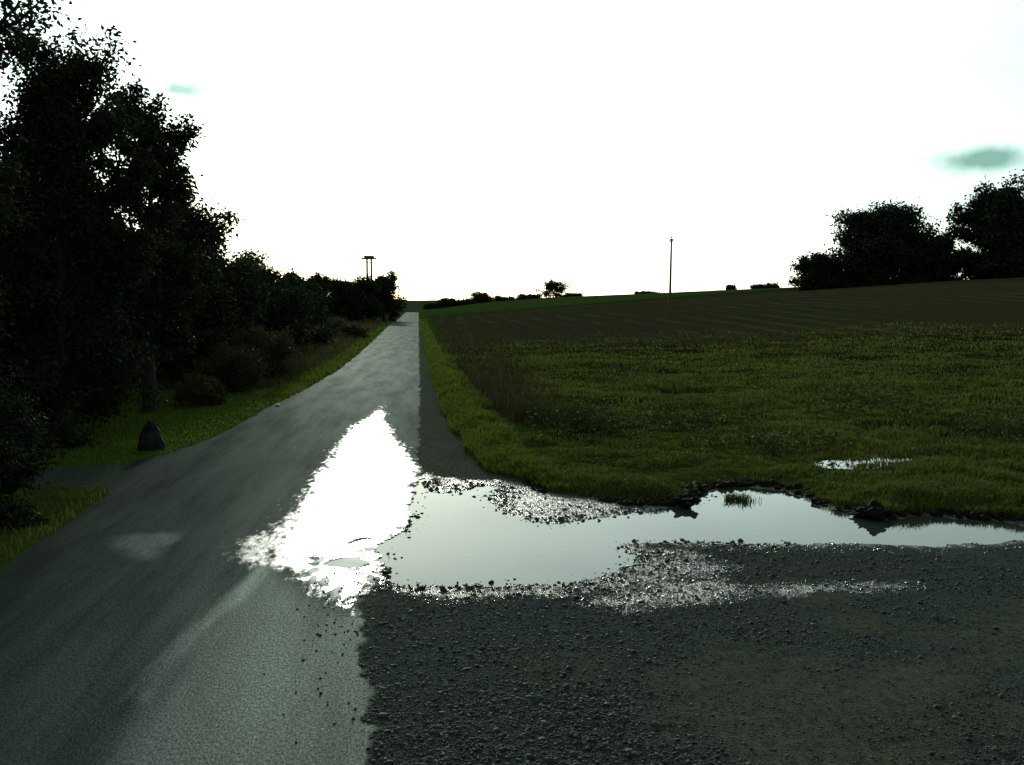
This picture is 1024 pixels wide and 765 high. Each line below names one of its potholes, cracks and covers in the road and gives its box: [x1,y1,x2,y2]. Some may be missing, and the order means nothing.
pothole [376,476,642,588]
pothole [320,557,370,569]
pothole [305,556,322,566]
pothole [638,486,1024,563]
pothole [345,536,375,547]
